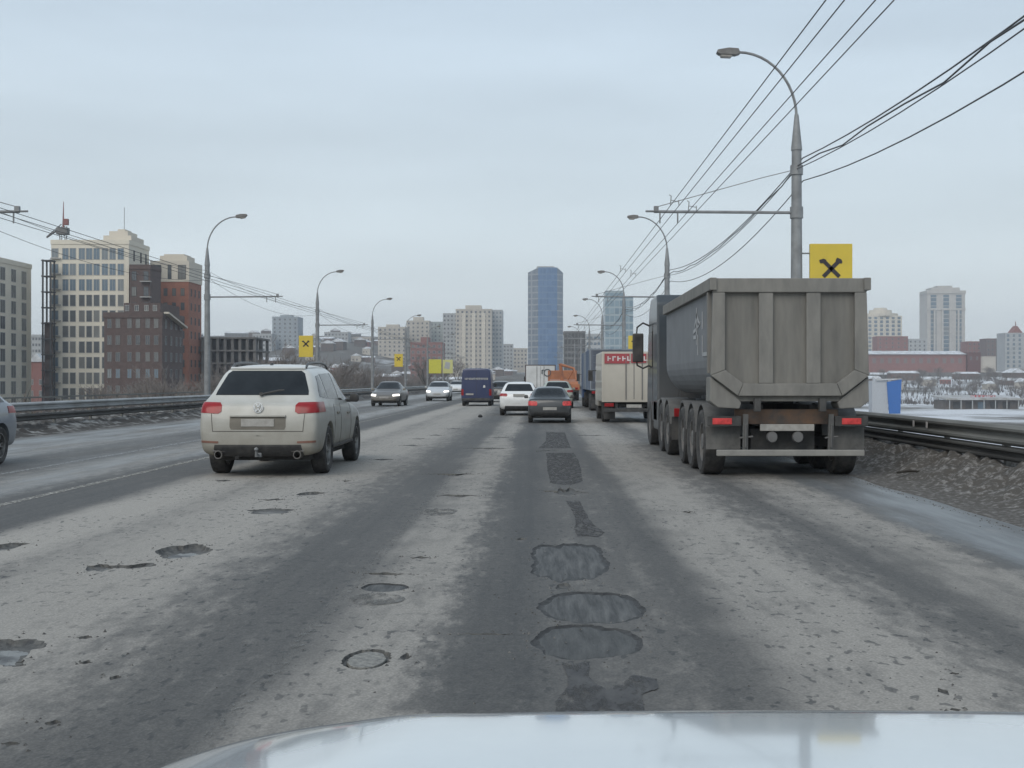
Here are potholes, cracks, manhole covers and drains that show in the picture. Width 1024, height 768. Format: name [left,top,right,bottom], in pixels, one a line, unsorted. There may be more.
pothole [0,543,30,551]
manhole cover [341,649,392,670]
pothole [86,563,156,572]
pothole [155,544,213,559]
pothole [536,592,646,624]
pothole [361,583,409,592]
pothole [530,624,643,660]
pothole [0,639,47,667]
pothole [530,543,610,583]
